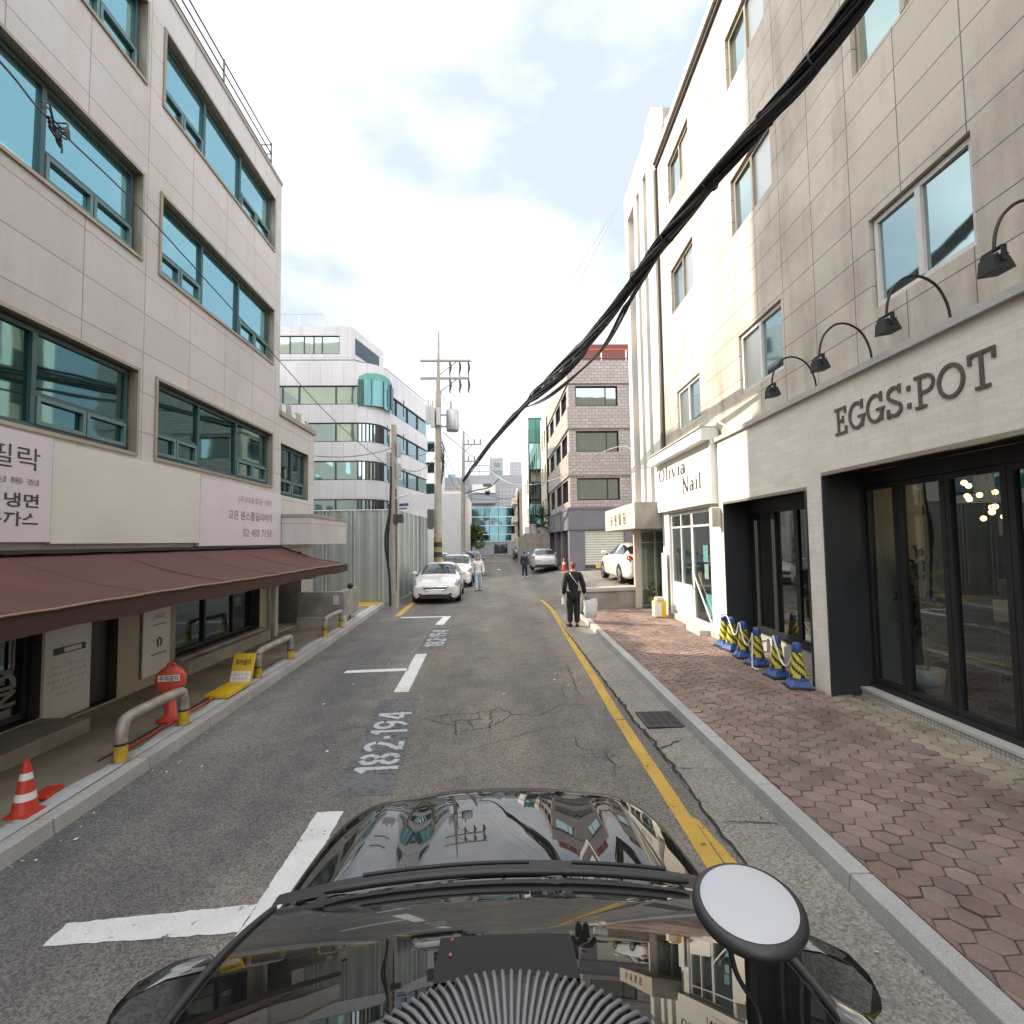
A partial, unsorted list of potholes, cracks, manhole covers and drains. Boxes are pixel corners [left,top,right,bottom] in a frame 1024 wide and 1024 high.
crack [422,662,622,775]
drain grate [635,711,685,728]
